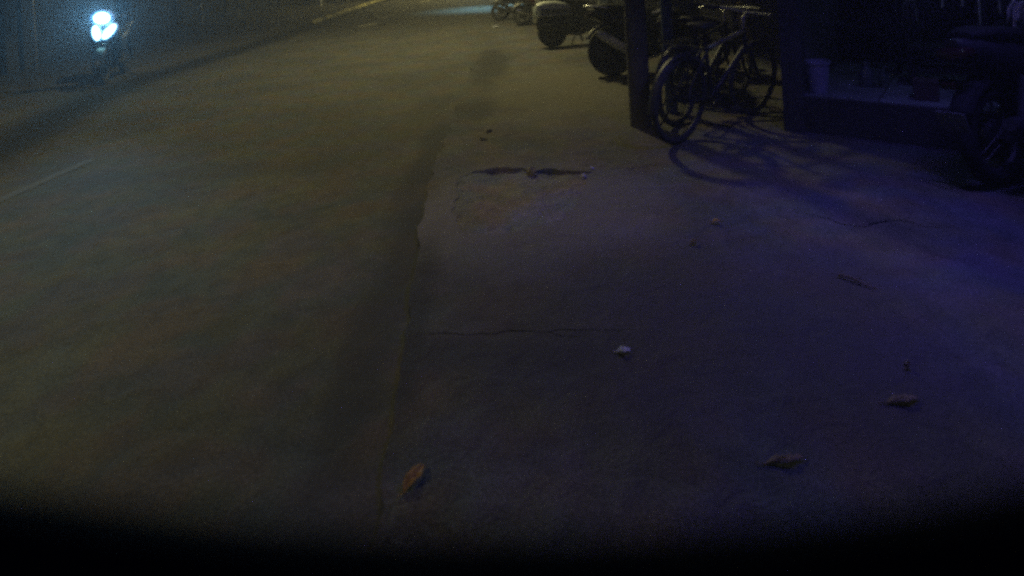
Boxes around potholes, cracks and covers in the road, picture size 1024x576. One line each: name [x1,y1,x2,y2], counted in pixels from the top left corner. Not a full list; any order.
crack [426,329,628,337]
crack [801,212,959,229]
